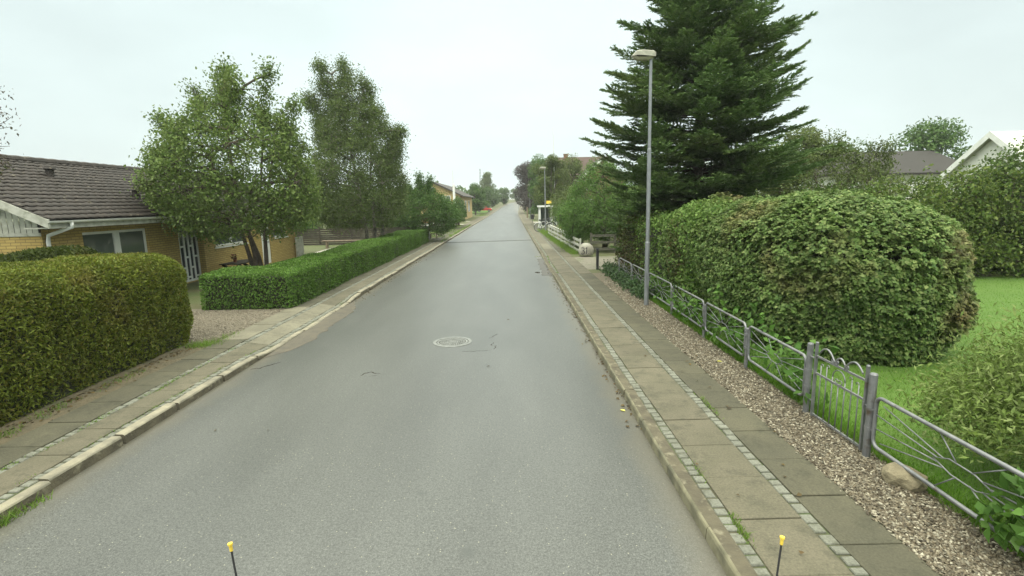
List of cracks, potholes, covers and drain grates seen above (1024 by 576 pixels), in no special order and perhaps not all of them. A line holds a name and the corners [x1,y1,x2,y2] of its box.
manhole cover [433,337,472,347]
